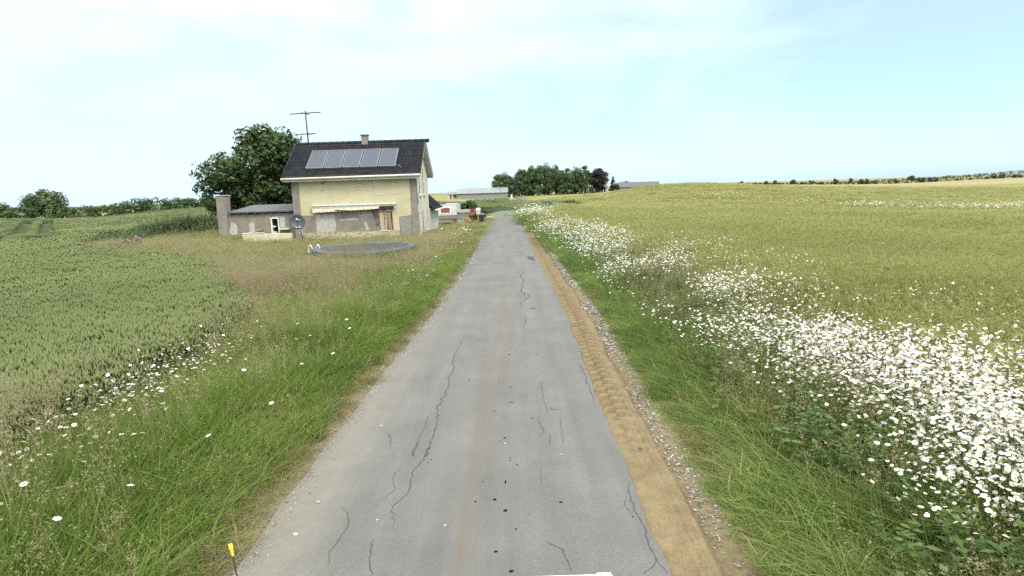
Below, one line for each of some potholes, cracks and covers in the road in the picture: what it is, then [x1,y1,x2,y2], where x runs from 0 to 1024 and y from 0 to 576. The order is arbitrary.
crack [624,482,667,574]
crack [383,338,464,533]
